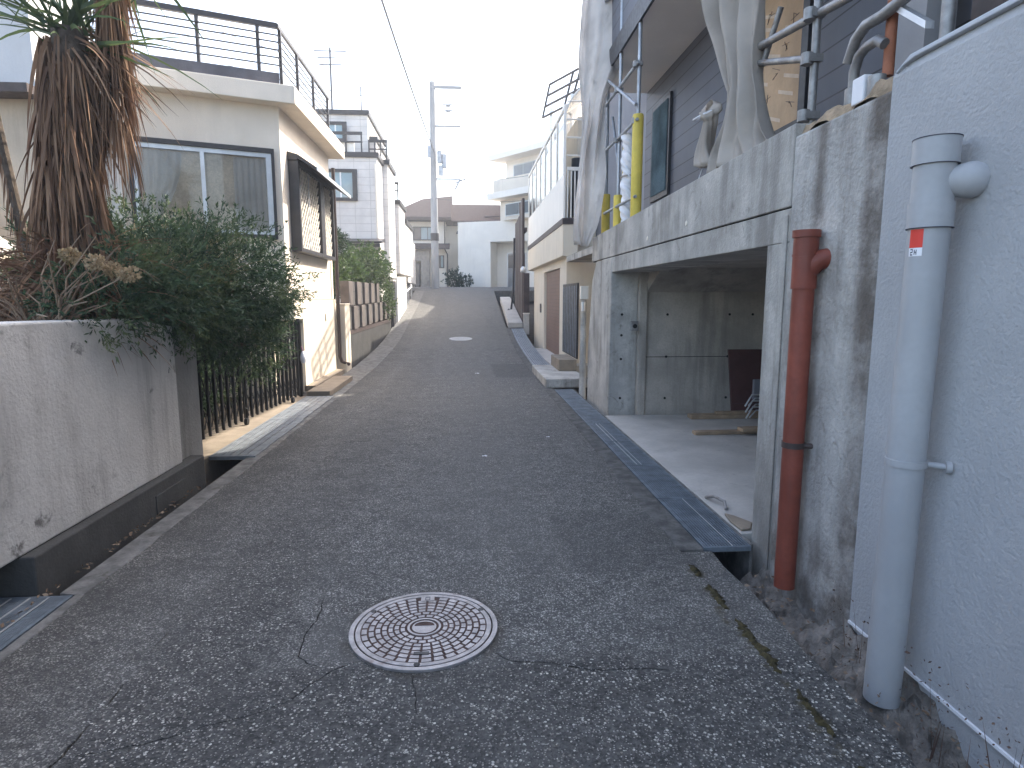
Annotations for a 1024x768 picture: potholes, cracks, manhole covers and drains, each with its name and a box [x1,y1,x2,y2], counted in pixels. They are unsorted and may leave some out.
drain grate [626,465,696,500]
drain grate [574,409,610,424]
drain grate [563,398,595,410]
drain grate [604,441,658,466]
manhole cover [348,592,498,673]
drain grate [554,389,582,399]
drain grate [587,423,631,442]
drain grate [658,498,751,552]
drain grate [0,595,73,652]
